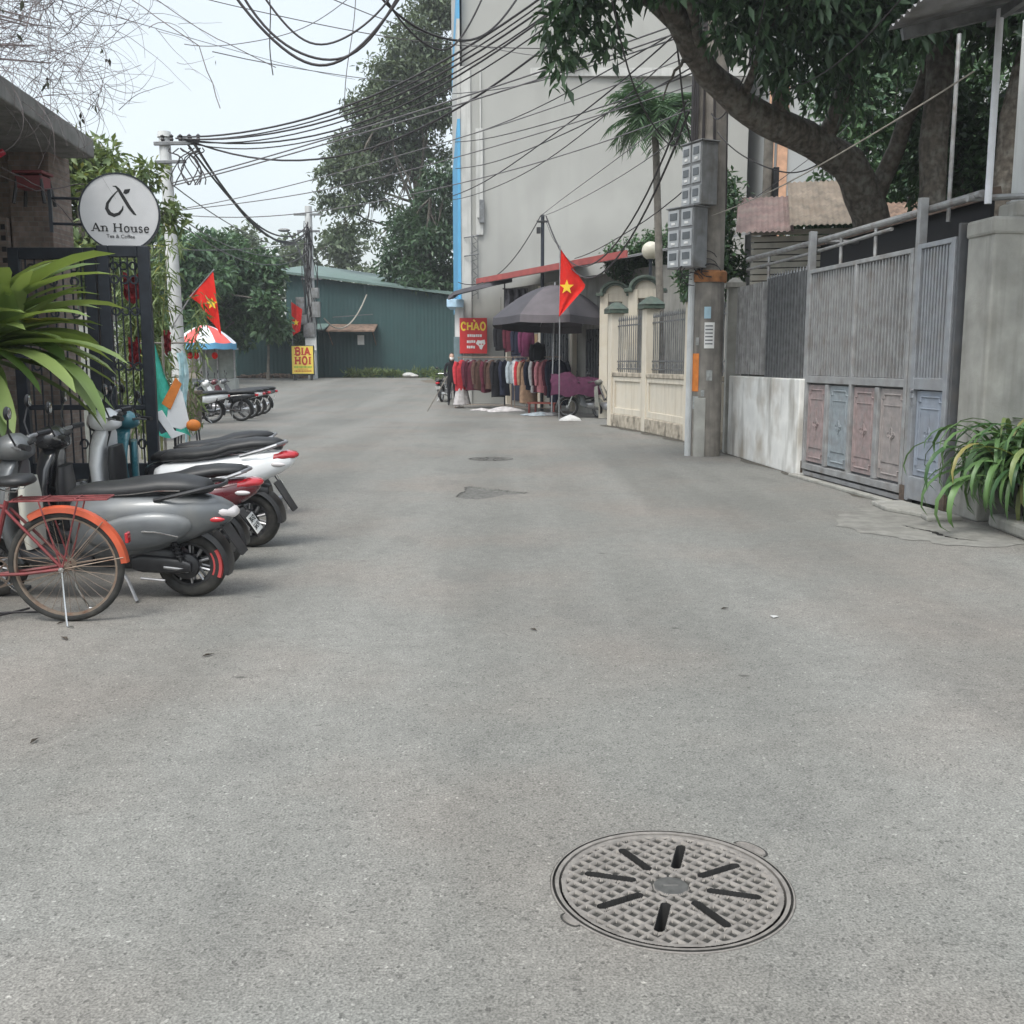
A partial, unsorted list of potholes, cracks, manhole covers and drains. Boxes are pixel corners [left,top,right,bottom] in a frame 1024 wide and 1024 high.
manhole cover [550,830,796,954]
